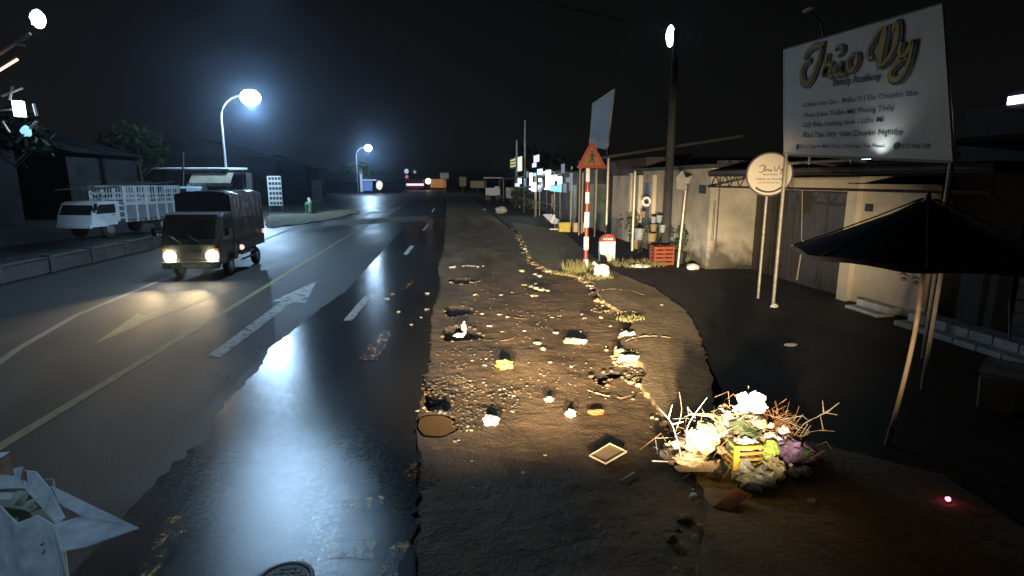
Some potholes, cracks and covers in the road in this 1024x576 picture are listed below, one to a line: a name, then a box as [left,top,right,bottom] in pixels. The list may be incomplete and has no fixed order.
pothole [423,384,455,412]
pothole [588,369,627,387]
pothole [417,412,459,438]
pothole [443,305,478,318]
manhole cover [259,561,315,576]
pothole [440,324,486,342]
pothole [447,277,481,285]
crack [589,288,650,313]
